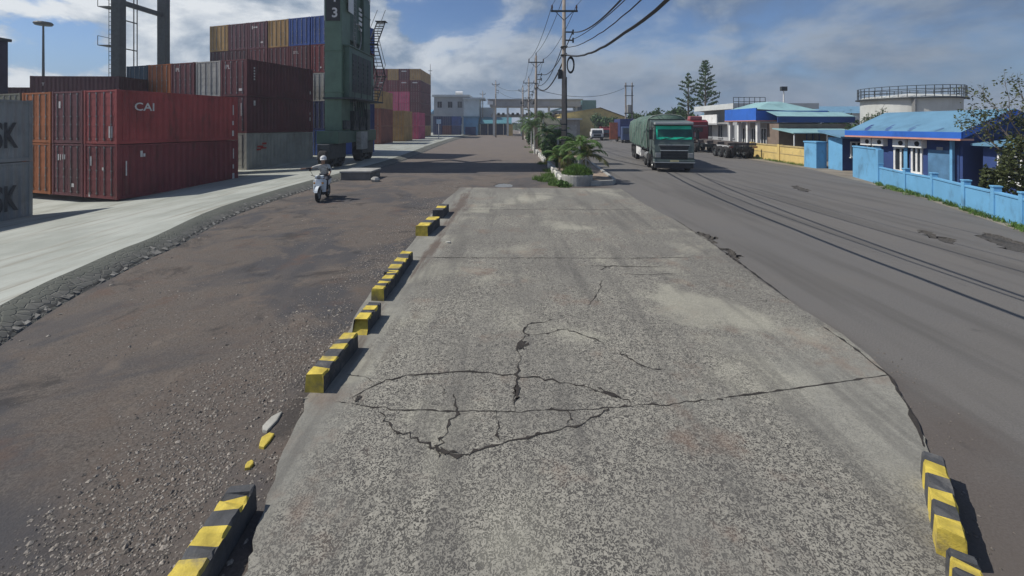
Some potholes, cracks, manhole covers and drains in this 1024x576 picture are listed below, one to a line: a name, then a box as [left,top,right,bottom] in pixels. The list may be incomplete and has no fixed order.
crack [587,265,656,303]
crack [336,318,723,459]
